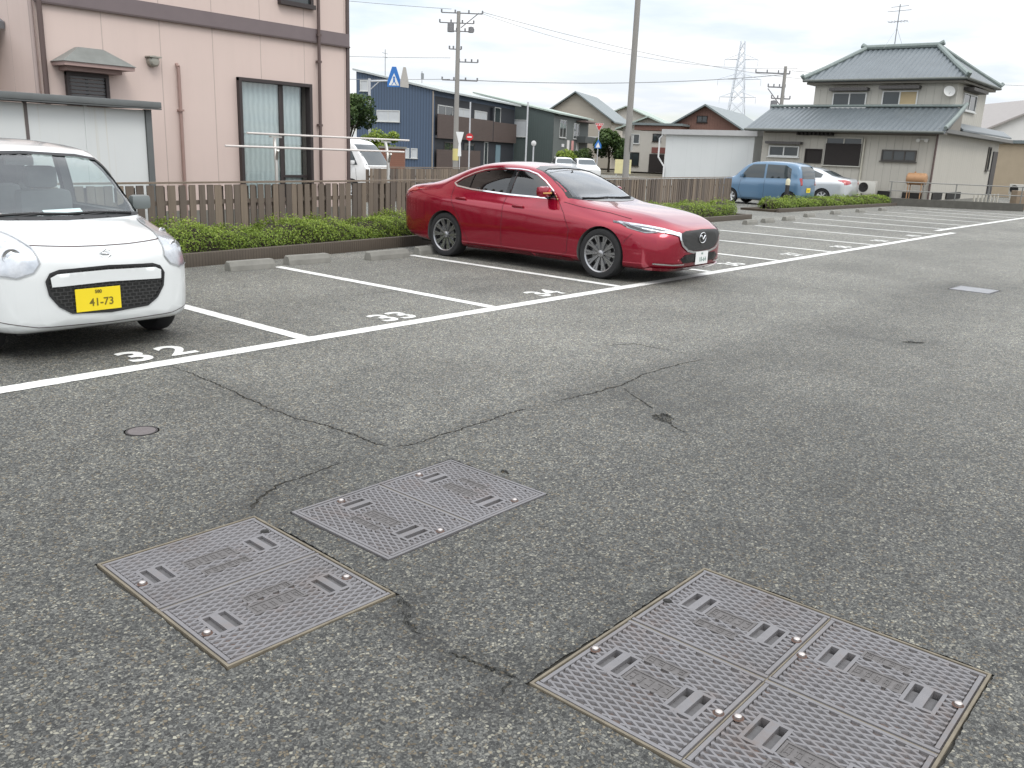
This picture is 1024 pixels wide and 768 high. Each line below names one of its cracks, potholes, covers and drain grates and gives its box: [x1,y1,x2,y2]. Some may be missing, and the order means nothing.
crack [548,343,700,432]
manhole cover [123,426,160,436]
pothole [652,413,674,424]
crack [250,463,340,510]
crack [396,596,519,697]
manhole cover [948,286,999,294]
manhole cover [290,459,548,561]
manhole cover [94,516,402,671]
crack [171,366,526,456]
manhole cover [525,568,994,768]
